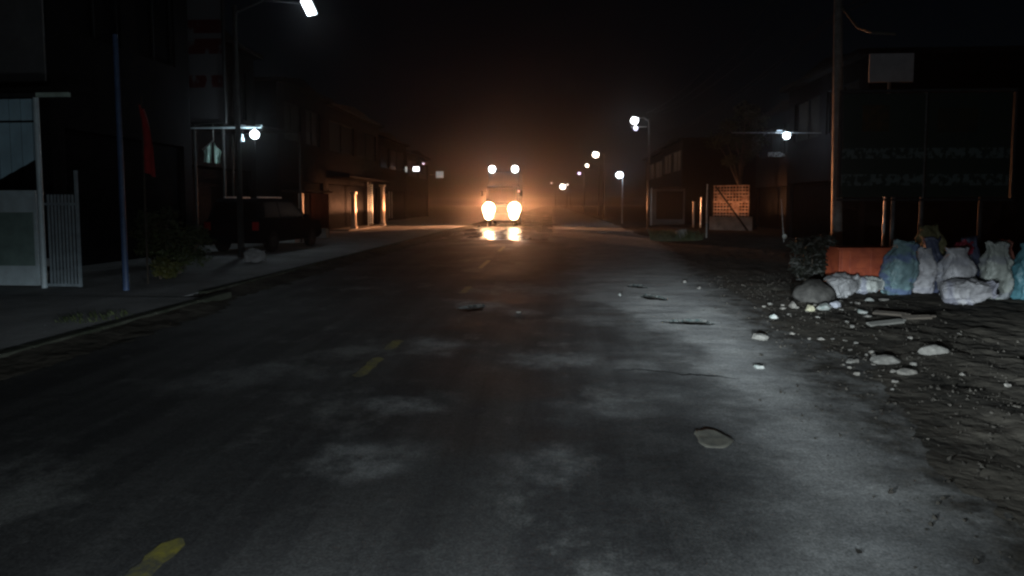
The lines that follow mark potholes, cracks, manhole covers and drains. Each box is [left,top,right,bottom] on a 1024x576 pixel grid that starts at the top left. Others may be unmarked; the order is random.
pothole [456,304,486,312]
crack [617,368,738,379]
